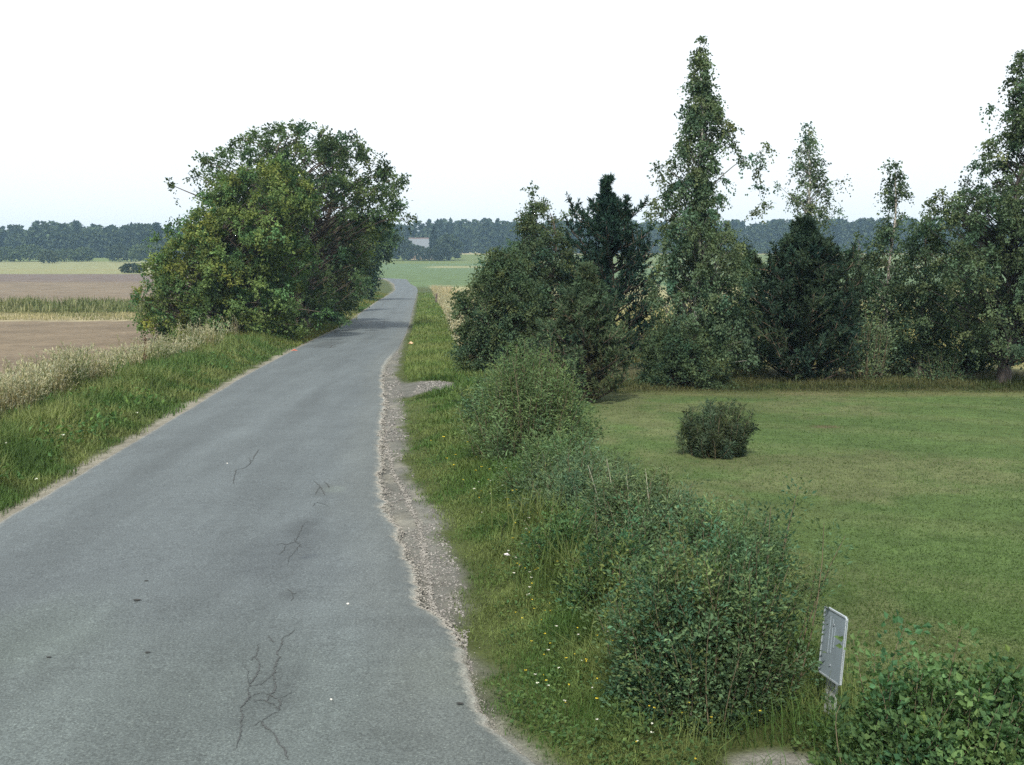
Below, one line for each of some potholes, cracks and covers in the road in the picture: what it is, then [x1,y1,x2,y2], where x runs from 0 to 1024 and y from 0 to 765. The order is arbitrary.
crack [279,482,330,564]
crack [236,629,297,759]
